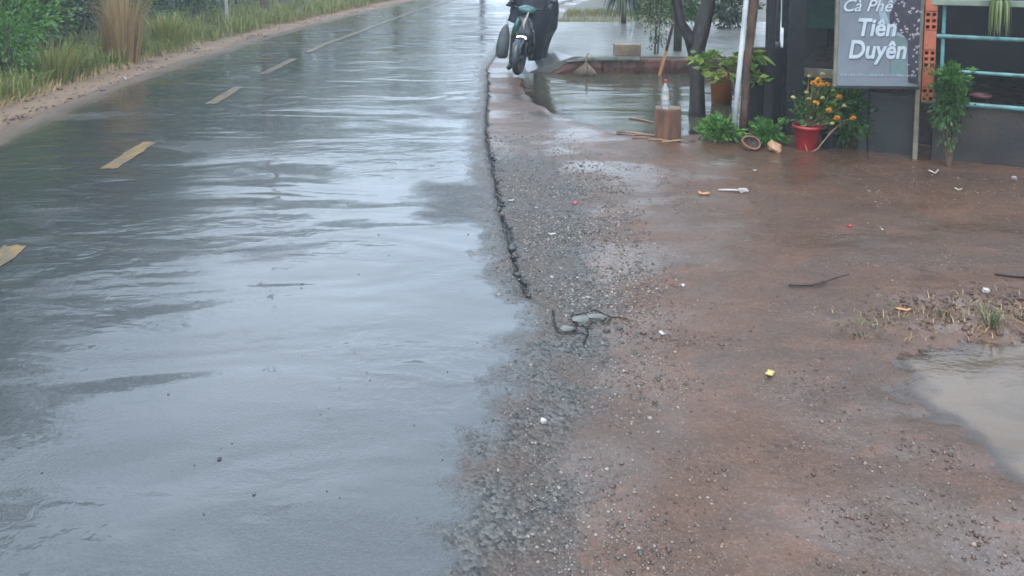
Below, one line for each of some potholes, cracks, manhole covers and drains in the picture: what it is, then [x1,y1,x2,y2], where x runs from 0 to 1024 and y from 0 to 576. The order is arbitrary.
crack [485,68,532,300]
crack [552,309,628,344]
